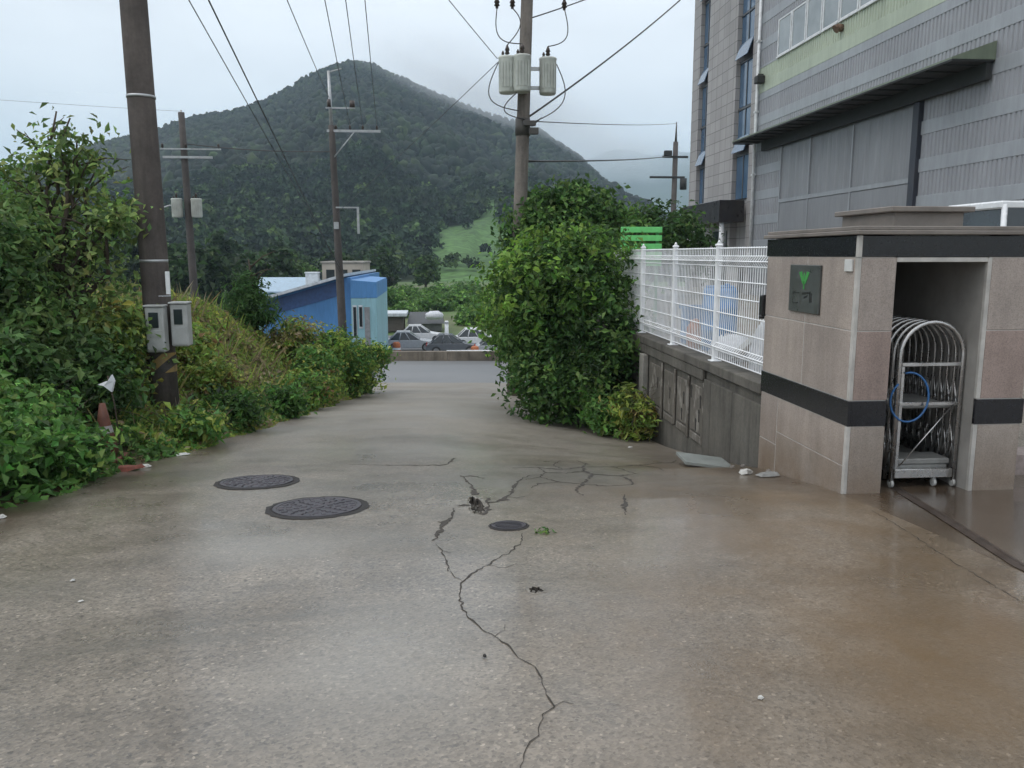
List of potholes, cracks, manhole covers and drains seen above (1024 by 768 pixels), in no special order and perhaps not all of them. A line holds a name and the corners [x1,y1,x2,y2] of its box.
manhole cover [213,474,300,490]
crack [353,458,676,768]
manhole cover [265,496,370,519]
manhole cover [488,520,529,531]
